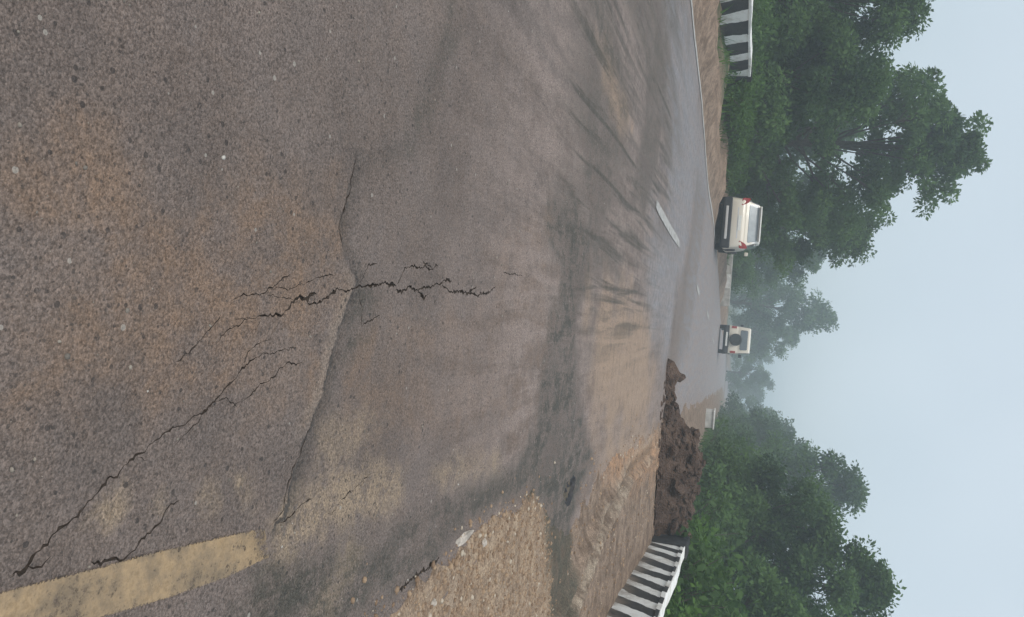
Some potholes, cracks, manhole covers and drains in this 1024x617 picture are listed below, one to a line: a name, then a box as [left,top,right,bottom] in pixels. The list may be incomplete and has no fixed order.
crack [400,557,439,592]
crack [10,260,522,578]
